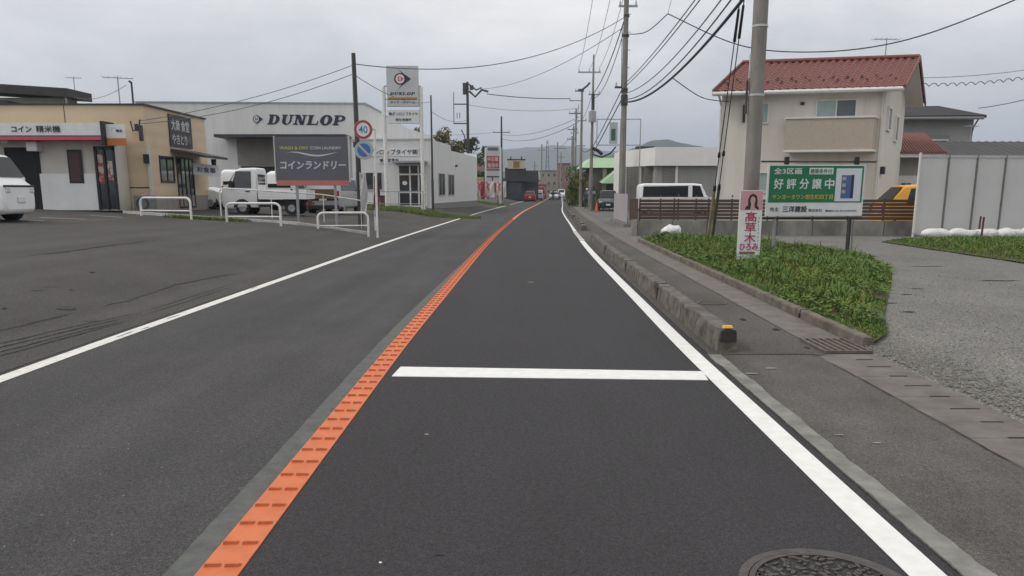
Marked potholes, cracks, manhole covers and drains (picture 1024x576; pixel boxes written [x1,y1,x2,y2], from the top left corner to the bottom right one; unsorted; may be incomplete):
drain grate [800,338,873,354]
manhole cover [738,548,902,576]
